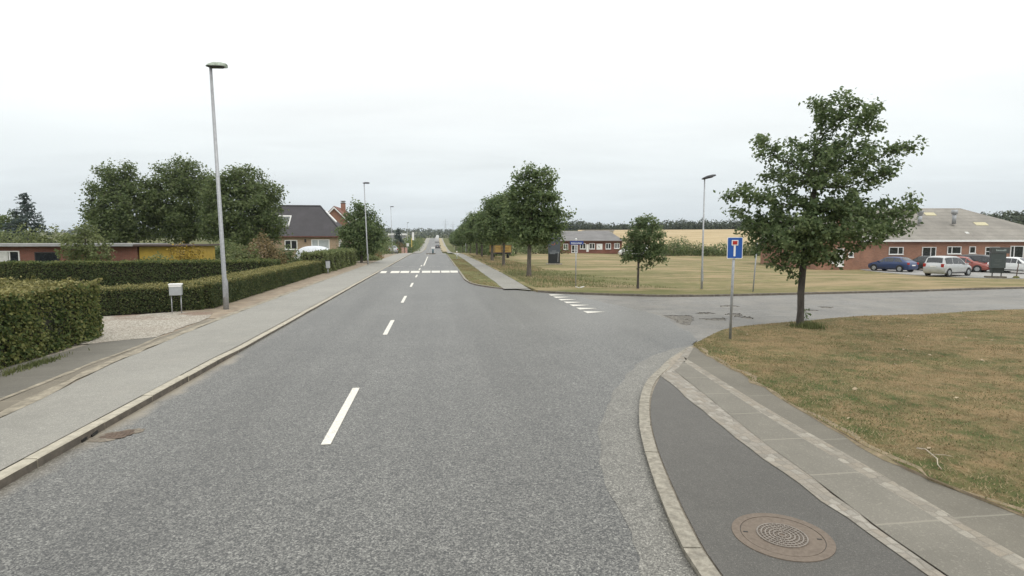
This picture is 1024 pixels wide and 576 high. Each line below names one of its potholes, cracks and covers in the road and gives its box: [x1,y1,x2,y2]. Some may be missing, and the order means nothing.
manhole cover [732,513,836,562]
drain grate [81,428,144,443]
